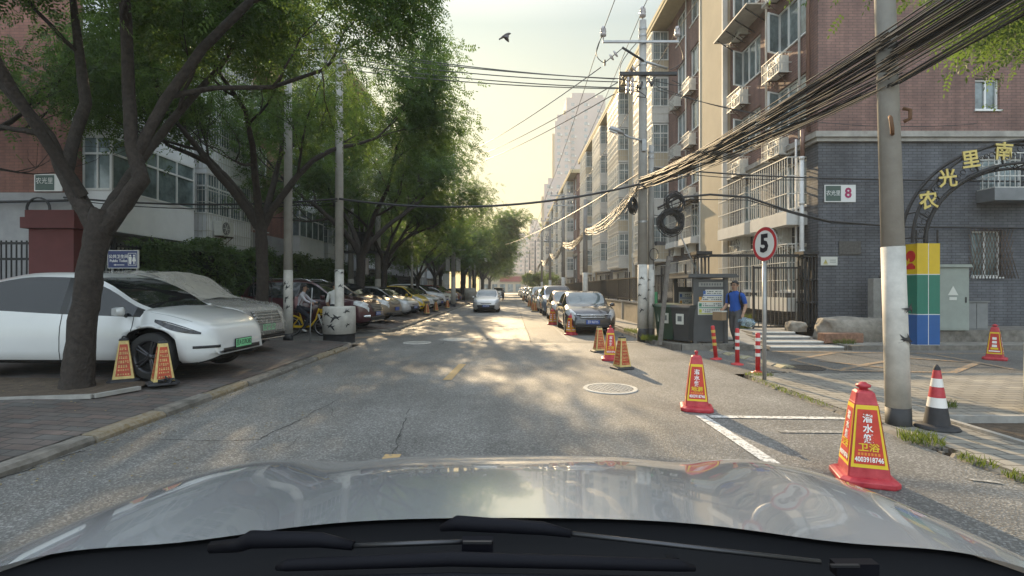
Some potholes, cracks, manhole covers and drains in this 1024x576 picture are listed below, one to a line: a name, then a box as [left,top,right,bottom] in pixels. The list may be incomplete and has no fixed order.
crack [127,397,338,449]
manhole cover [583,383,638,394]
